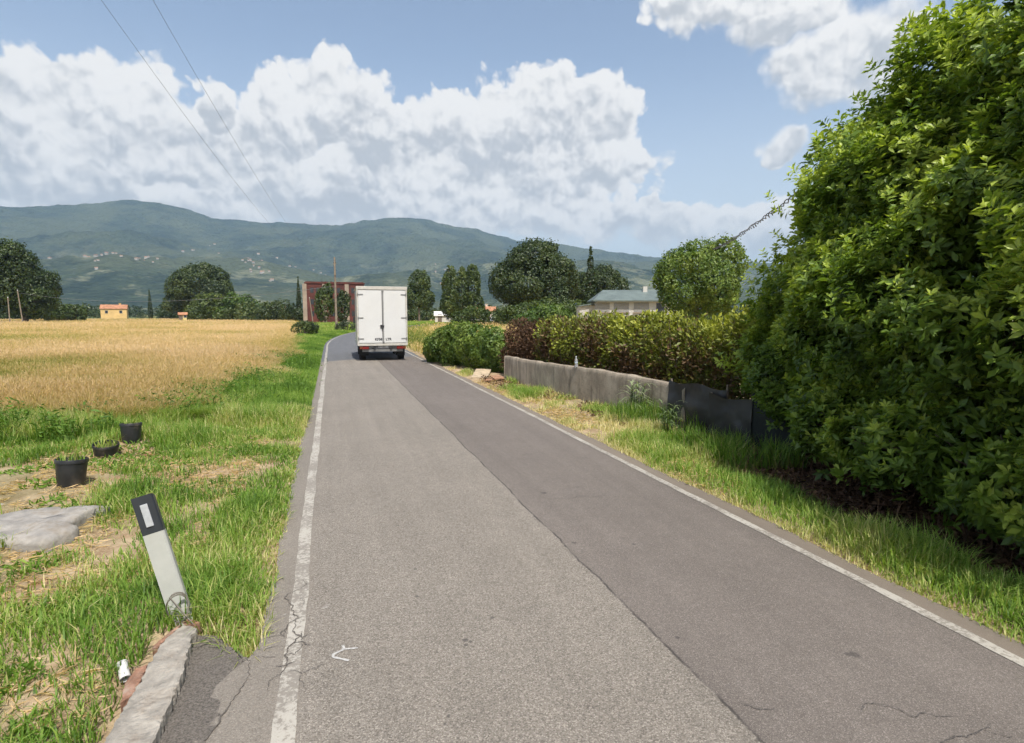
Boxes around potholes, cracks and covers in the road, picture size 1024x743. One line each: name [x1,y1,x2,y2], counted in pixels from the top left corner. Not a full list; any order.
crack [862,702,953,717]
crack [941,723,1013,743]
crack [258,580,323,690]
